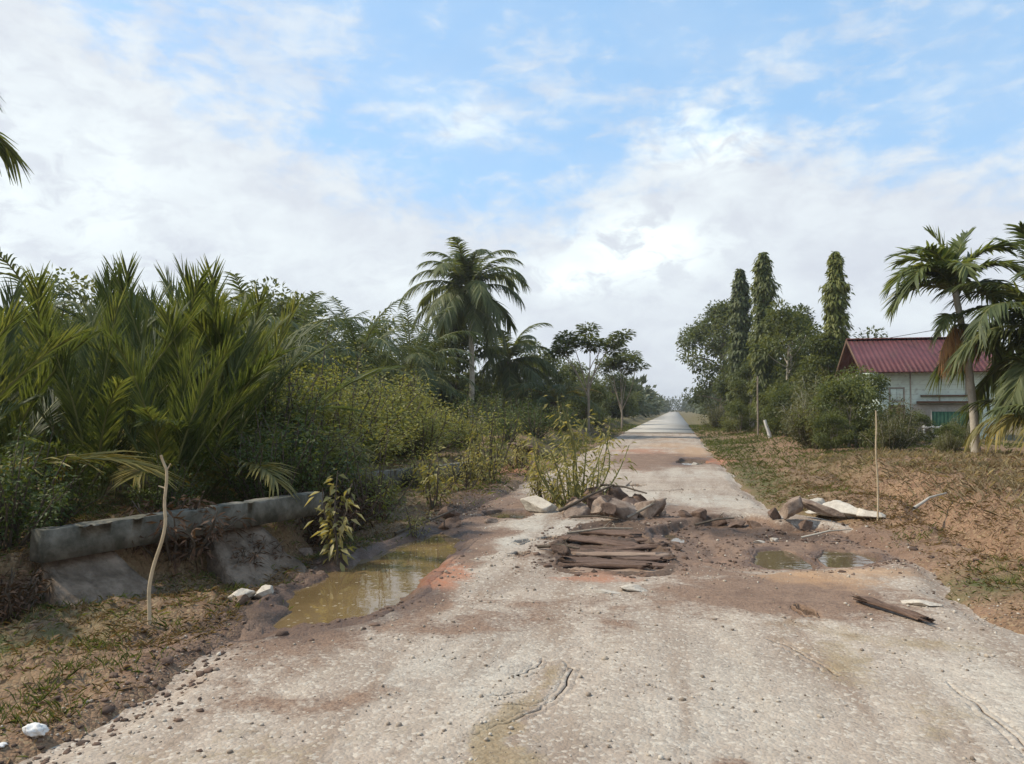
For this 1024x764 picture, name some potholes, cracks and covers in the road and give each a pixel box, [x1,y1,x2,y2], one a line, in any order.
pothole [748,547,821,571]
crack [471,657,580,737]
pothole [238,526,482,646]
crack [941,681,1024,755]
pothole [674,458,712,466]
pothole [642,525,688,544]
pothole [549,519,681,577]
pothole [813,548,887,569]
